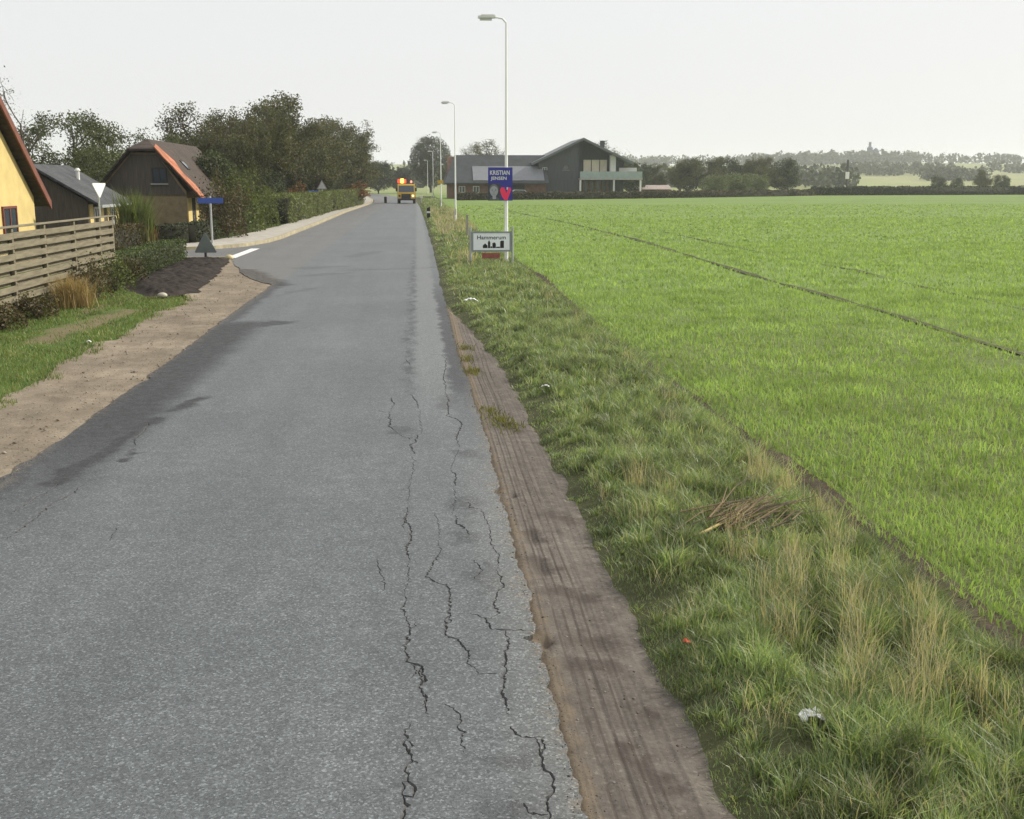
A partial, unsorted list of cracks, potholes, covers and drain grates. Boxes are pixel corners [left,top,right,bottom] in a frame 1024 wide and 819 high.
crack [7,482,86,539]
crack [377,354,556,819]
